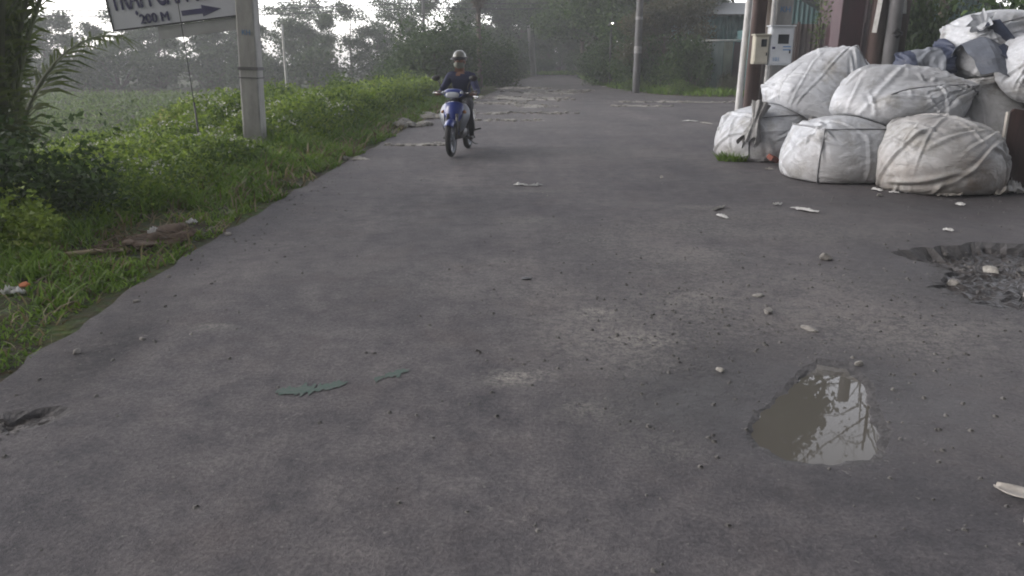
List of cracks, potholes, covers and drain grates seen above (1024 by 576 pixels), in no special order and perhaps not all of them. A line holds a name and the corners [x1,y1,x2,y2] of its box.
pothole [893,241,1024,313]
pothole [746,358,894,467]
pothole [0,406,76,434]
